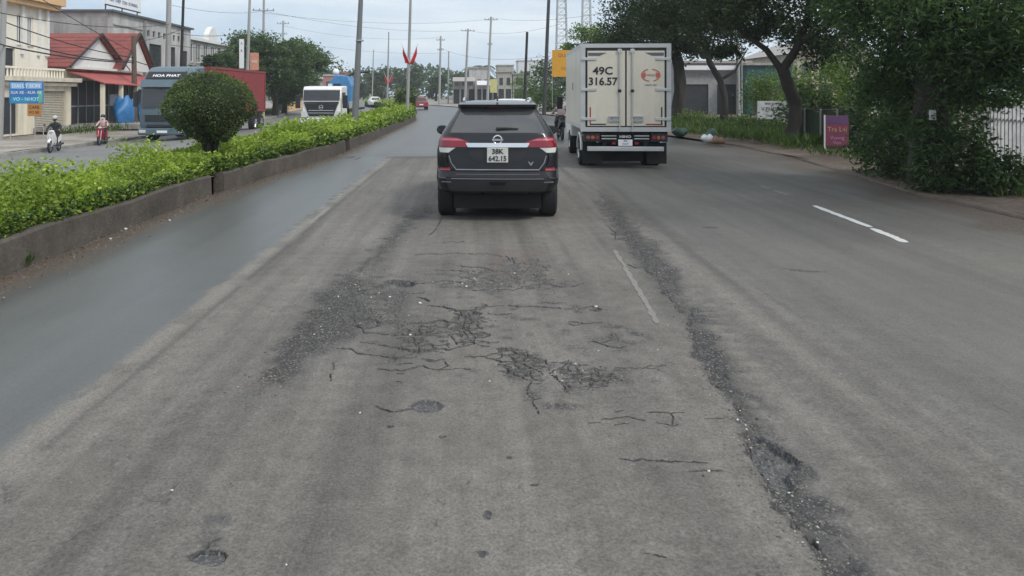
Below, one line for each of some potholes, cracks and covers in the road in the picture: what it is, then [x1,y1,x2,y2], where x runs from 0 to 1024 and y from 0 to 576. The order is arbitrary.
crack [619,458,723,472]
pothole [375,399,444,413]
crack [329,217,666,414]
pothole [187,538,228,567]
crack [589,410,684,427]
pothole [748,435,803,497]
